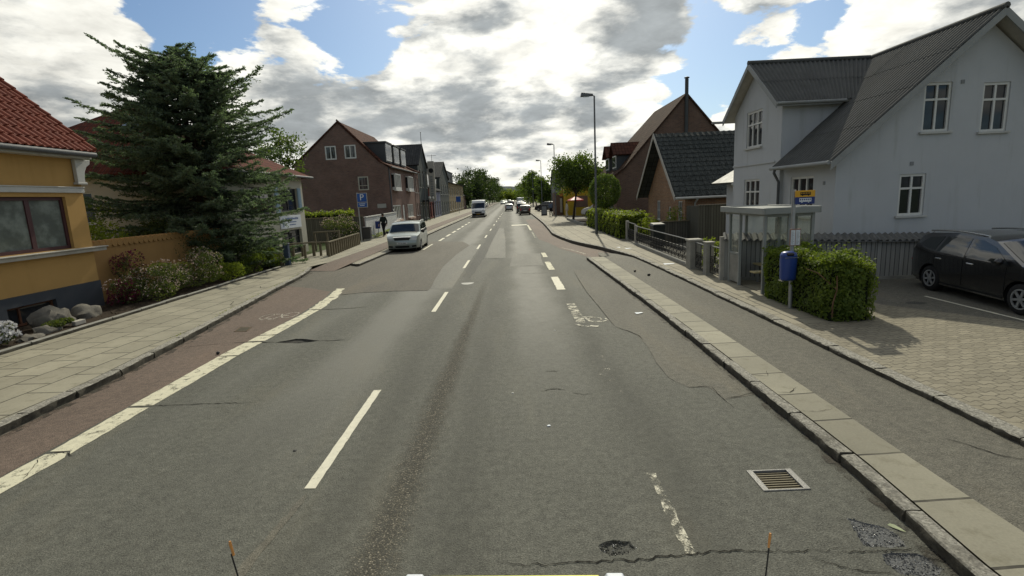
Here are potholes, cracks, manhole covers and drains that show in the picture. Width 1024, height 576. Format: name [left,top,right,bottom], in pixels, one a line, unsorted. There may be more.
pothole [882,551,944,576]
pothole [847,518,906,548]
drain grate [746,468,811,492]
crack [508,547,946,574]
pothole [598,540,637,556]
